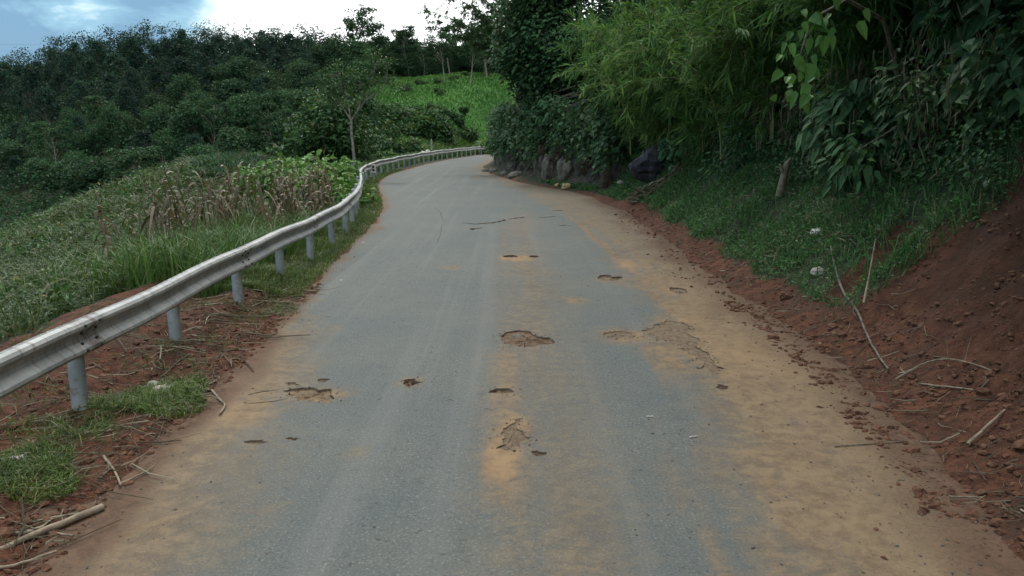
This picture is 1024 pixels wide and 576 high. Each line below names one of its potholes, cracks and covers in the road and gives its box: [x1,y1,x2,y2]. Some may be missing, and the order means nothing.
pothole [642,320,725,375]
crack [466,210,572,230]
pothole [284,387,335,403]
pothole [496,418,529,451]
pothole [603,331,636,339]
pothole [501,330,555,347]
